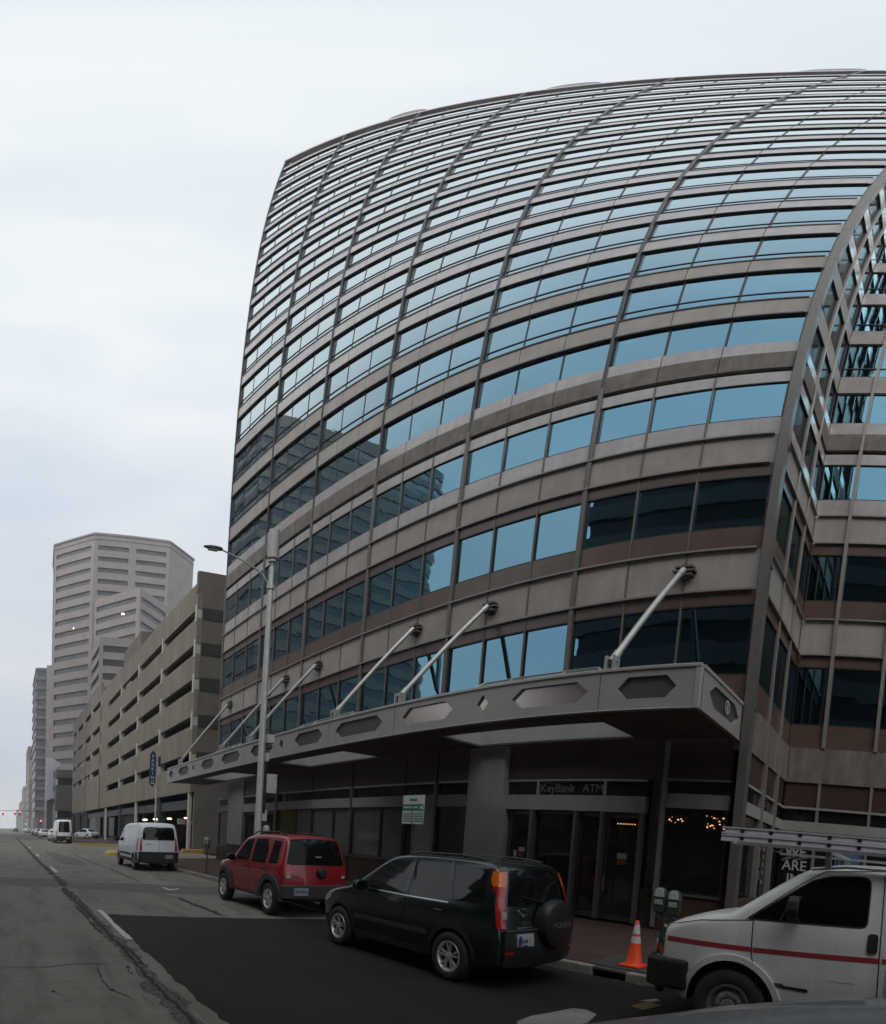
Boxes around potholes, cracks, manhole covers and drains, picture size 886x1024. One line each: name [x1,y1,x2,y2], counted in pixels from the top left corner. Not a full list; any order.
crack [50,950,146,999]
